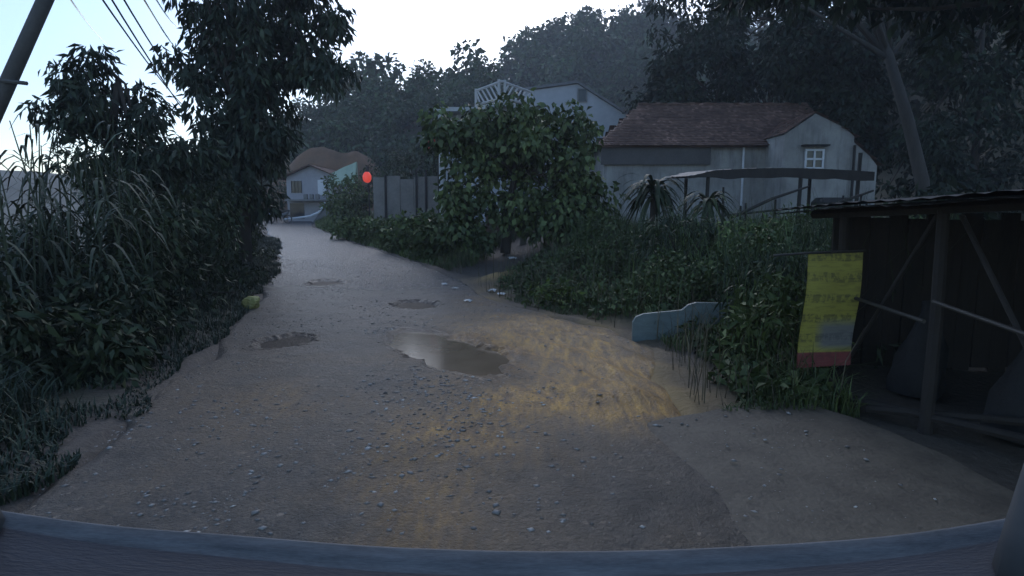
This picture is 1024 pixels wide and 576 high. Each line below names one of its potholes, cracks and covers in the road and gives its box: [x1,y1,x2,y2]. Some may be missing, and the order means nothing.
pothole [388,299,444,310]
pothole [248,331,321,350]
pothole [304,278,349,286]
pothole [380,326,527,380]
